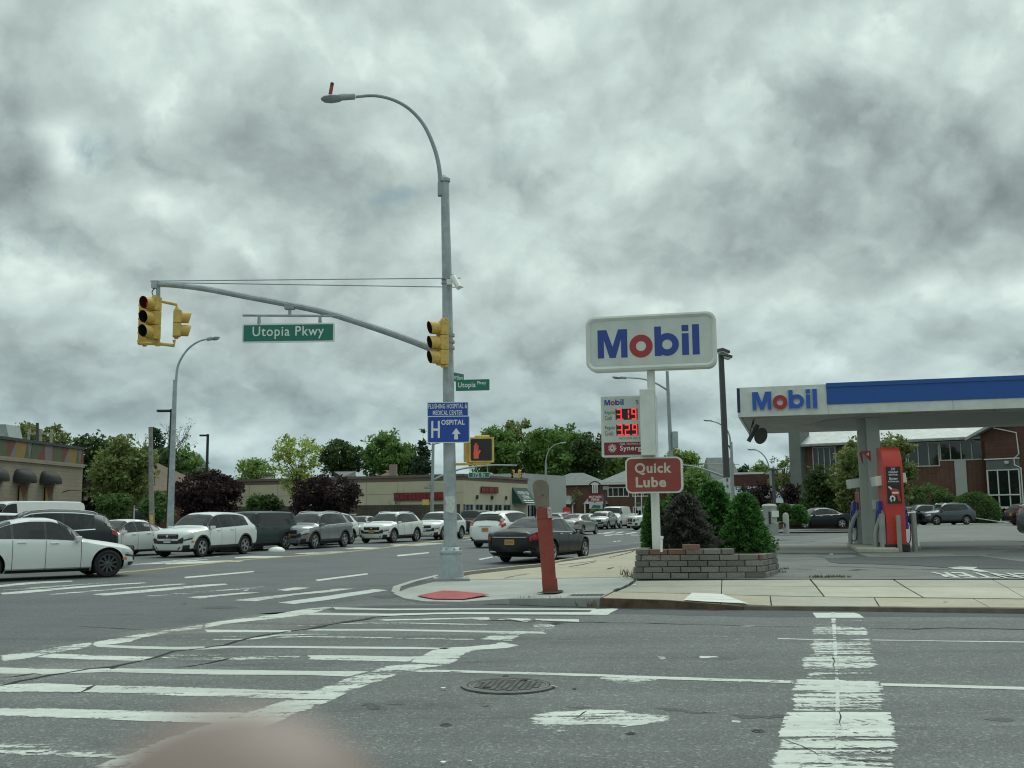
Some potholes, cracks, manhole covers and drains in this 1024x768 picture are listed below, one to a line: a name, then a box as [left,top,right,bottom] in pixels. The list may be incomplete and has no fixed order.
manhole cover [461,677,556,694]
